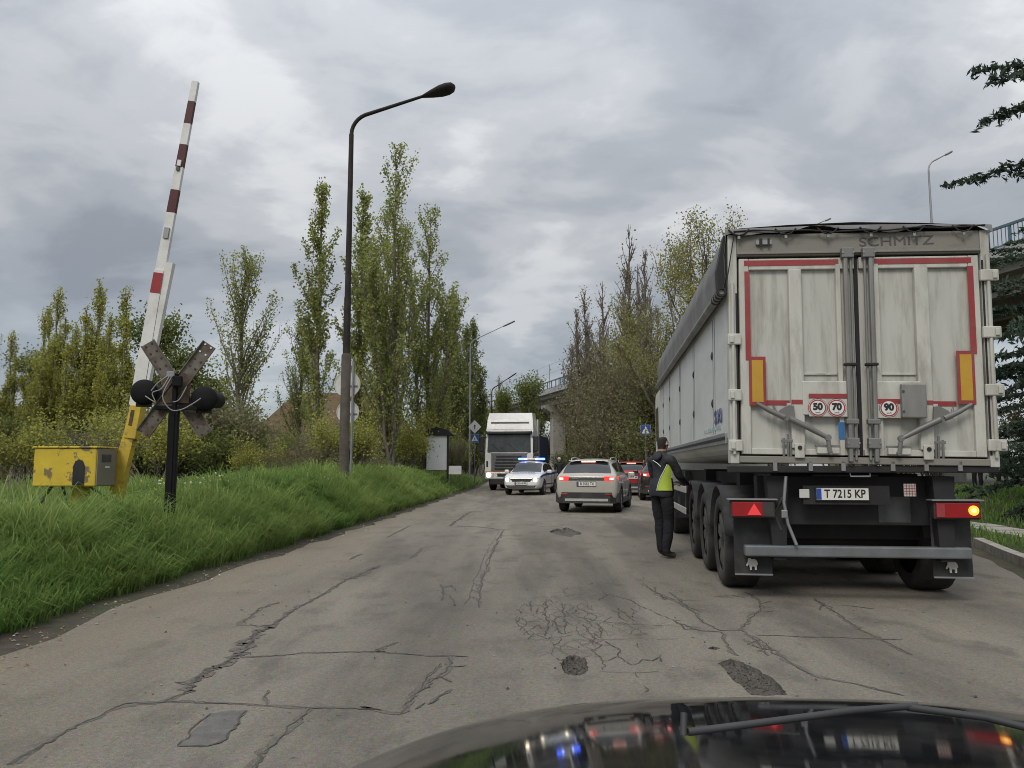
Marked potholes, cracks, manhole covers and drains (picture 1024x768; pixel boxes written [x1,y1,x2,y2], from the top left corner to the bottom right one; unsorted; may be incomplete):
pothole [559,655,589,676]
pothole [550,527,581,537]
crack [7,554,468,768]
crack [439,512,911,696]
pothole [718,659,787,696]
